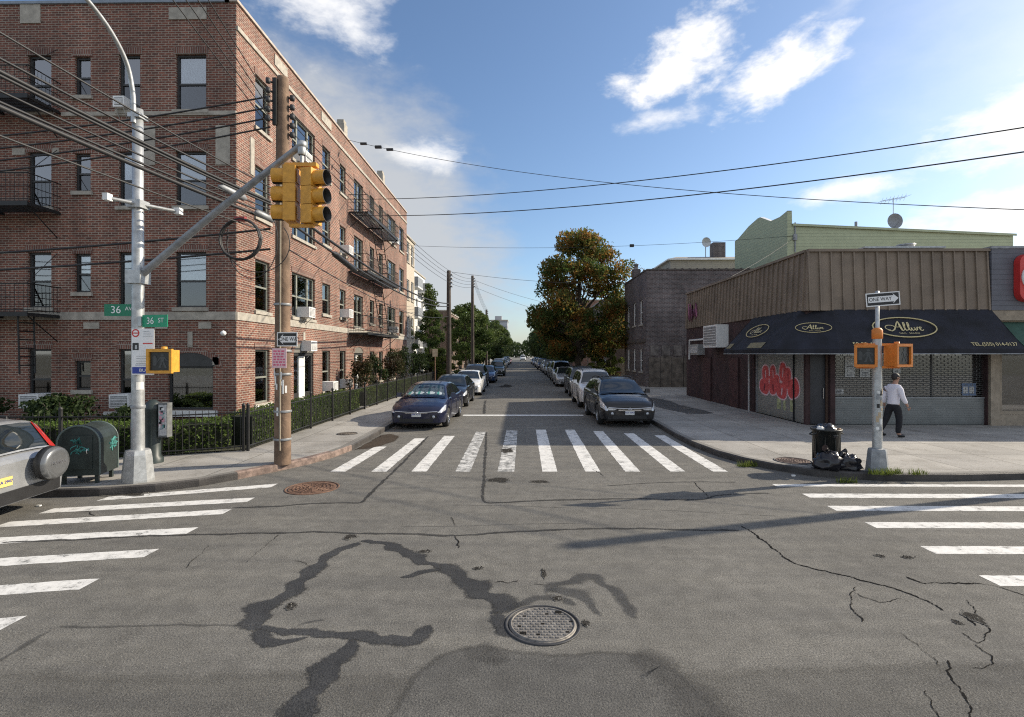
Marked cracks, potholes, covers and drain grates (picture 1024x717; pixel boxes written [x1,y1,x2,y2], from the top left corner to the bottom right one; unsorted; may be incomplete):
crack [741,526,1023,622]
manhole cover [773,457,812,465]
crack [962,601,994,668]
manhole cover [505,605,581,646]
crack [903,634,973,717]
manhole cover [284,481,340,495]
pothole [960,609,990,626]
